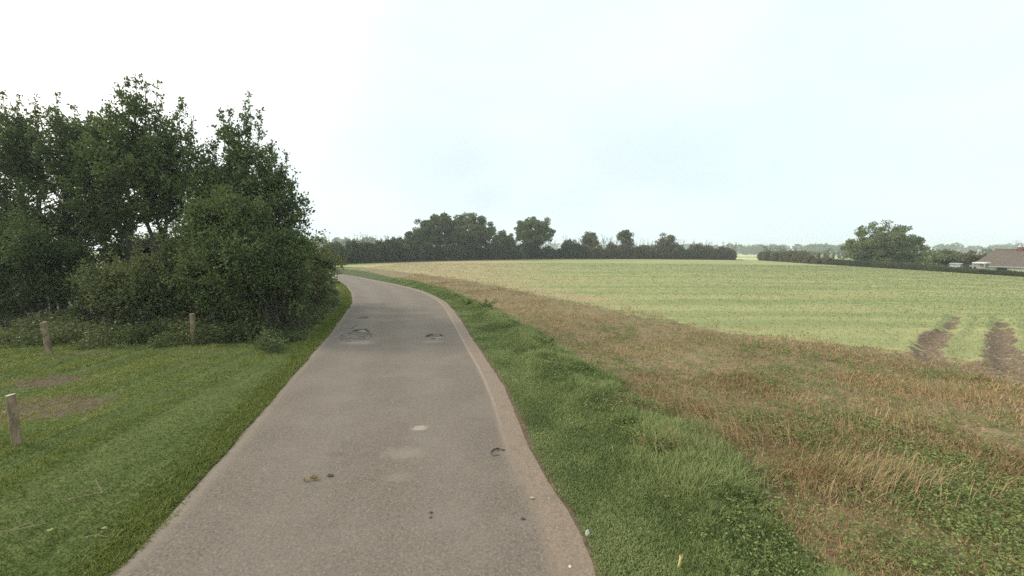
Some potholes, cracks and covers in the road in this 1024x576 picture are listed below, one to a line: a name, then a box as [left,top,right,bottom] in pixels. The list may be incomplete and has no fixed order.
pothole [338,328,372,342]
